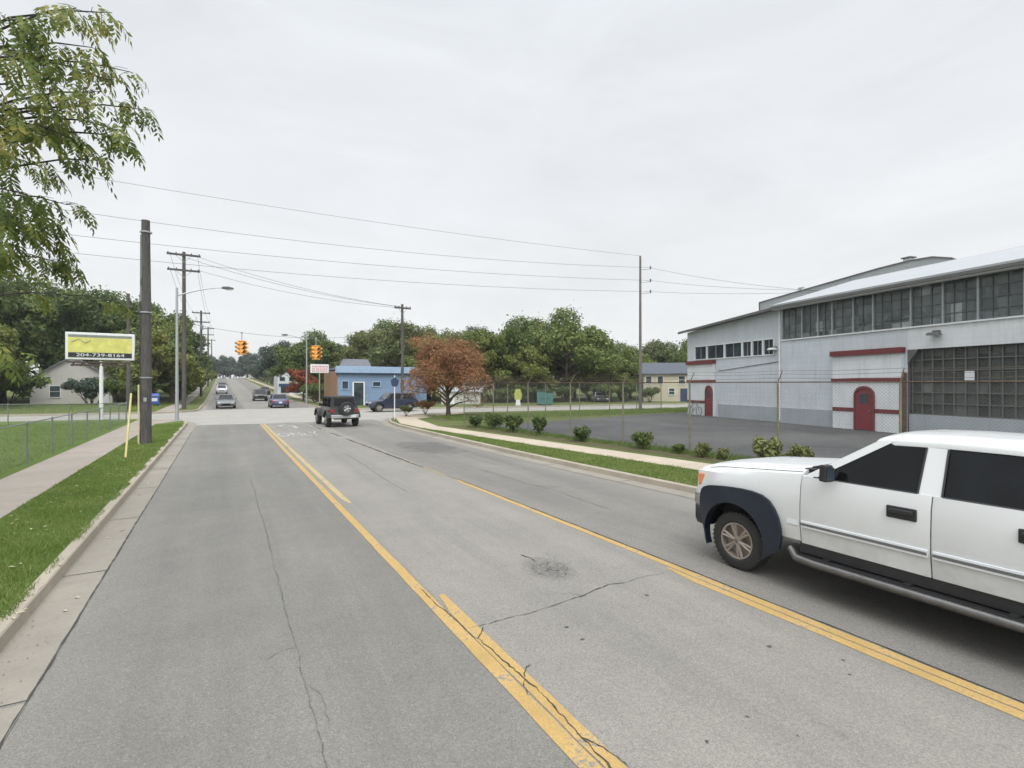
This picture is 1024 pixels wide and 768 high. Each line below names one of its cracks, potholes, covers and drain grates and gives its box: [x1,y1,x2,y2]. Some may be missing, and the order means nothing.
crack [423,575,648,768]
pothole [523,555,569,578]
crack [251,481,330,768]
